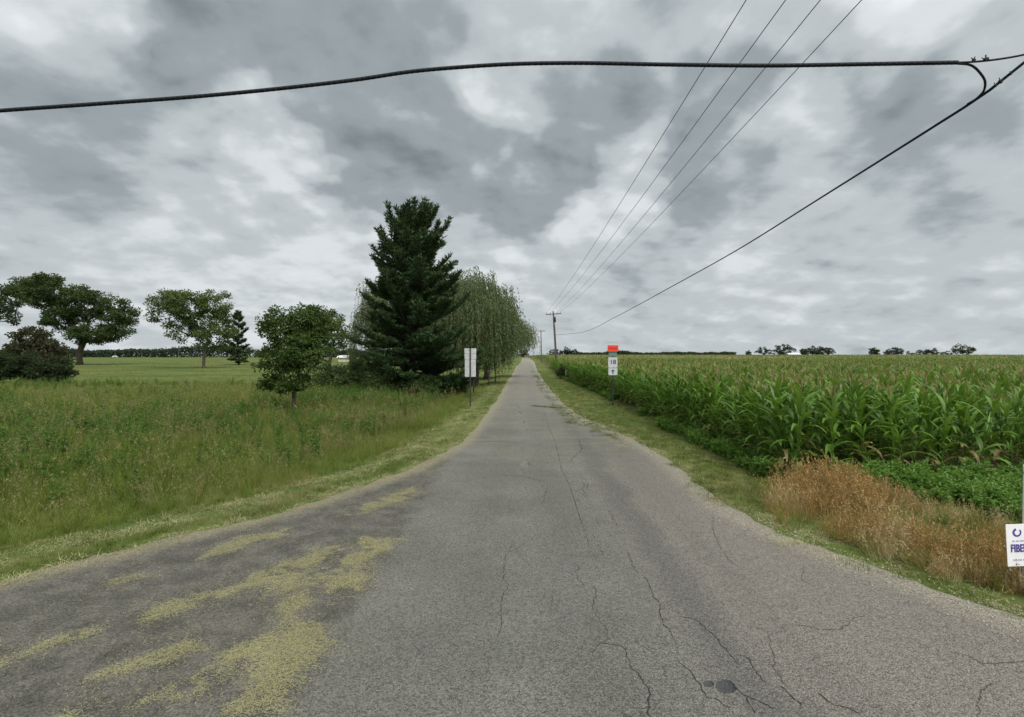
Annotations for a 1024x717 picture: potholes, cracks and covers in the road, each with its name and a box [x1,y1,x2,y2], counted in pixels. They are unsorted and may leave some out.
pothole [715,679,738,694]
crack [489,534,536,633]
crack [571,484,859,717]
